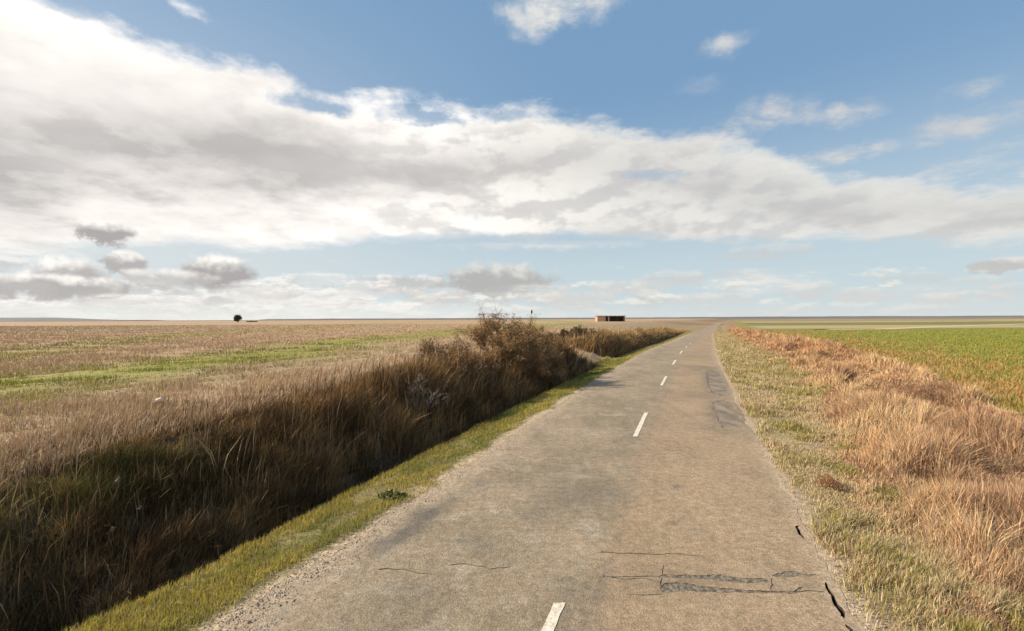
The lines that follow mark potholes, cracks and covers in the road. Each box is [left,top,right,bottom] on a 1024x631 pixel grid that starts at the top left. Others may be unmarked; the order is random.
crack [600,552,853,631]
crack [378,563,508,575]
